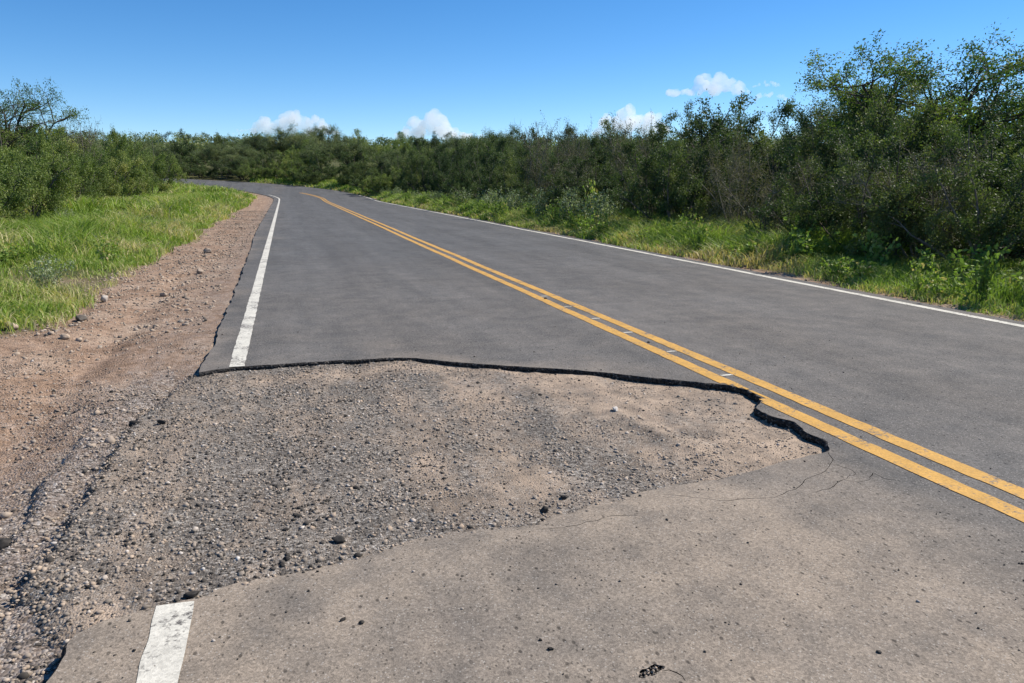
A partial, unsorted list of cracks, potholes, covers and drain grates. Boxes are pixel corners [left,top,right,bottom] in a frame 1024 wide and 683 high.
crack [665,453,890,501]
pothole [17,358,830,681]
